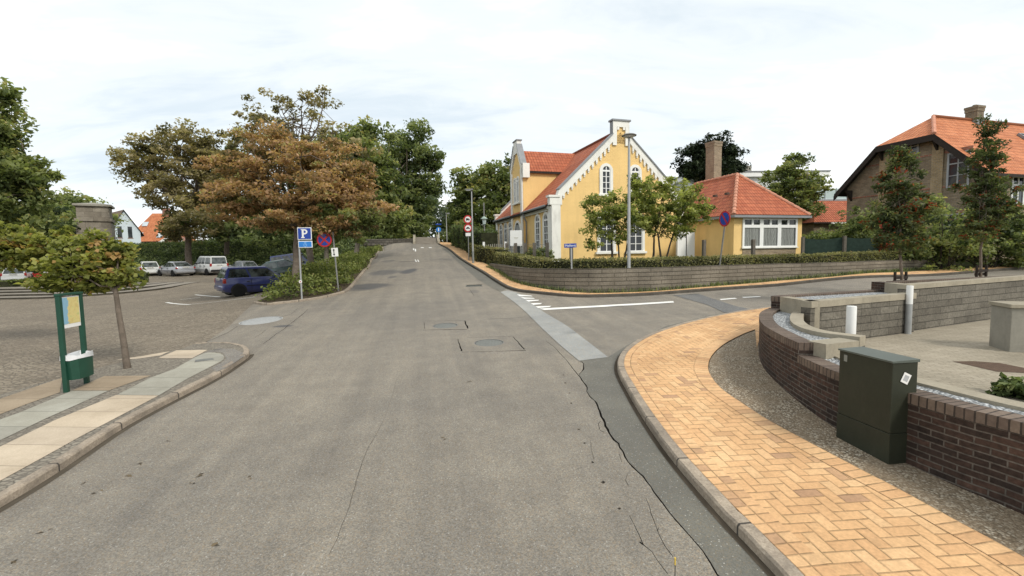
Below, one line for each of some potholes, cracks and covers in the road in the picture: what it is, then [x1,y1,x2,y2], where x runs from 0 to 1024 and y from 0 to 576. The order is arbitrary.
manhole cover [424,320,468,330]
crack [556,349,719,576]
manhole cover [458,336,526,352]
manhole cover [239,316,283,325]
